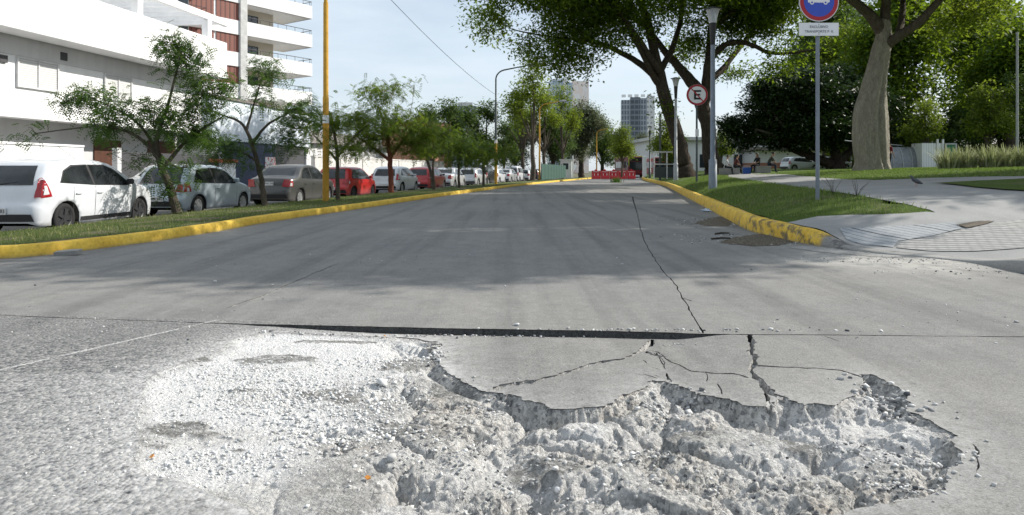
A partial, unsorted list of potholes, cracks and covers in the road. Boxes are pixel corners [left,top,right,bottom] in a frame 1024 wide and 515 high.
crack [427,198,864,415]
pothole [132,332,963,515]
